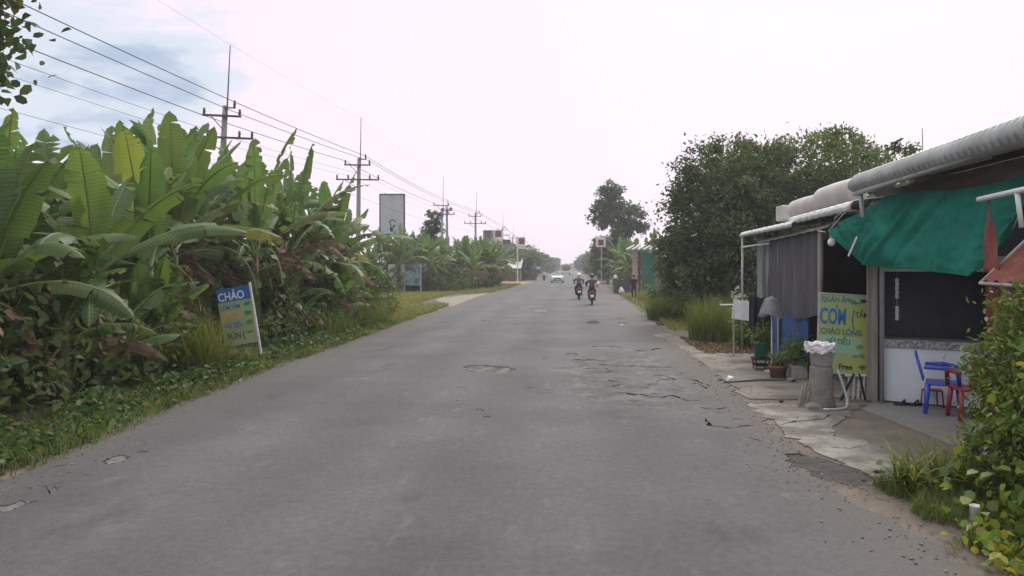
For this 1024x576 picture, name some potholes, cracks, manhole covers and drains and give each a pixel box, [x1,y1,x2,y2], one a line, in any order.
crack [569,346,761,441]
pothole [0,500,37,512]
pothole [102,455,130,464]
pothole [463,365,516,374]
pothole [785,453,874,488]
